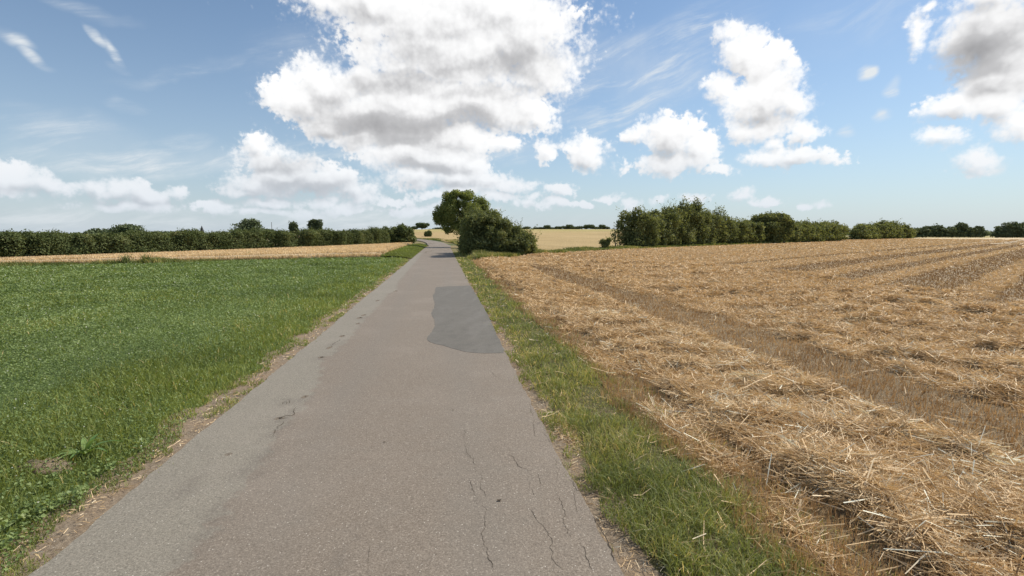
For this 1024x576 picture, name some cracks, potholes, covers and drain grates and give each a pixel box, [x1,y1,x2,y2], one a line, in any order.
crack [465,432,494,569]
crack [516,459,614,567]
